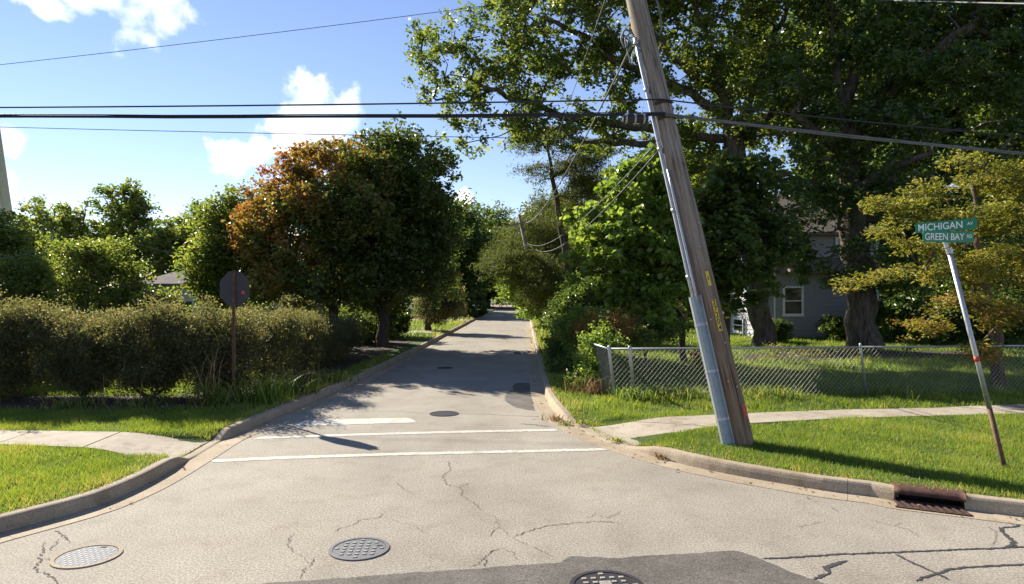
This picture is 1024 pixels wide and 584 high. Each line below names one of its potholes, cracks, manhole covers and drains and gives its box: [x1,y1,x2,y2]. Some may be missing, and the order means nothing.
manhole cover [49,543,123,569]
crack [470,510,621,568]
drain grate [892,482,972,517]
manhole cover [569,570,644,584]
manhole cover [328,537,390,561]
crack [32,530,70,584]
